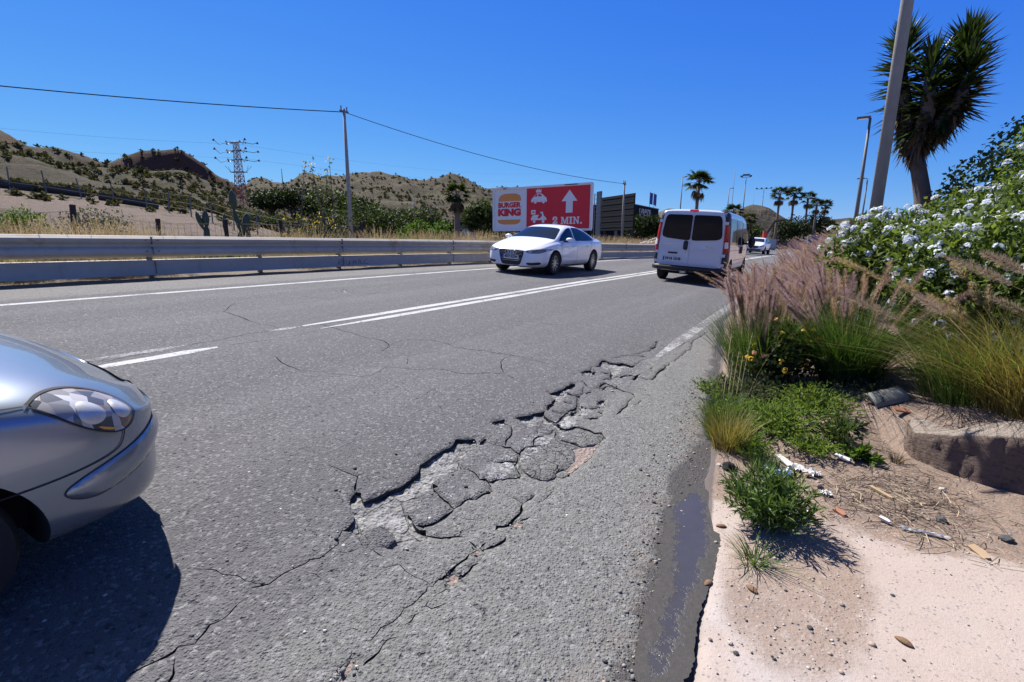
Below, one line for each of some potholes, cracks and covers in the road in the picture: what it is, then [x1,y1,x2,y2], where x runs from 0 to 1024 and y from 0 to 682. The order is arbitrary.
crack [267,324,567,383]
pothole [343,439,477,550]
crack [129,338,698,682]
pothole [566,443,600,473]
